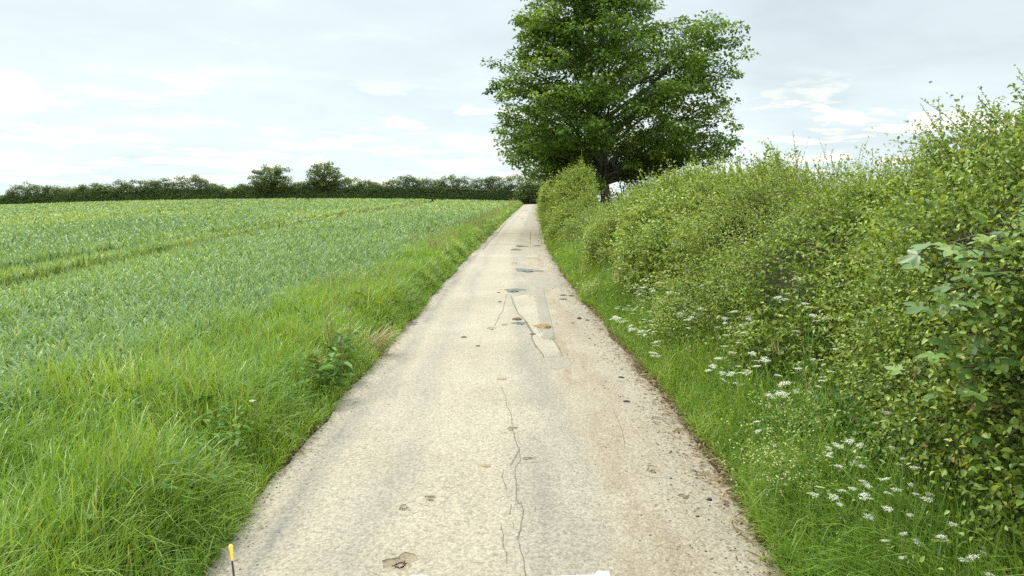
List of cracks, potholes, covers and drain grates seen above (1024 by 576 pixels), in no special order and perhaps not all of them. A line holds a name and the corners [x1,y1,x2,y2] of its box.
pothole [382,552,418,571]
crack [501,391,536,576]
crack [495,294,563,360]
